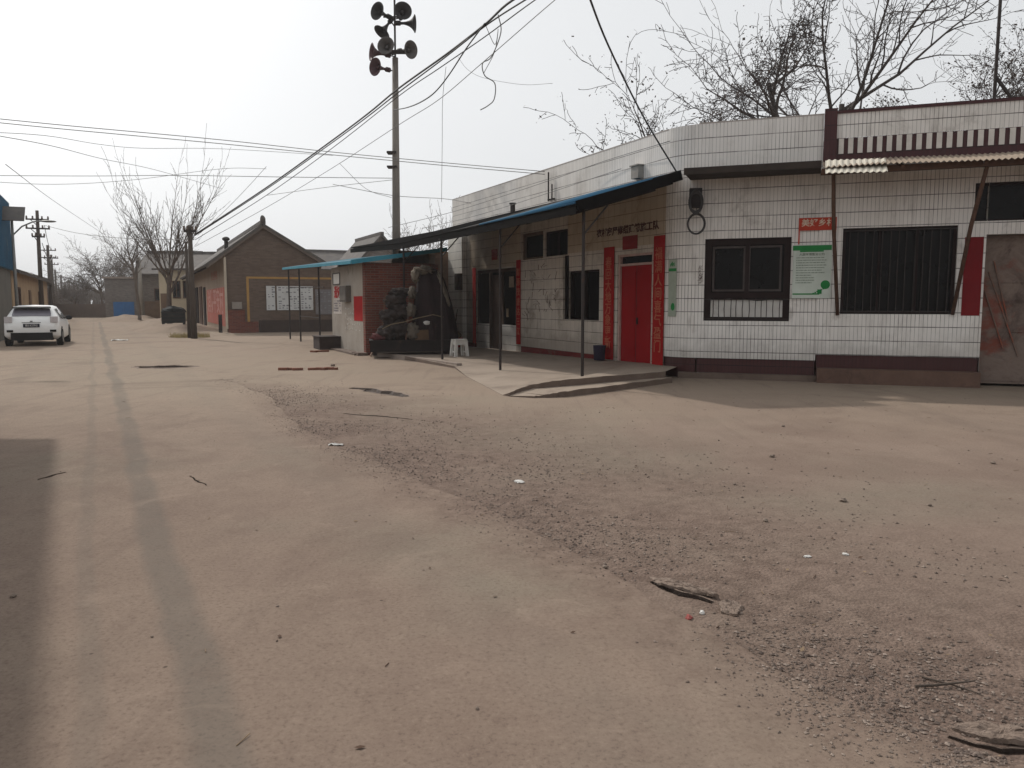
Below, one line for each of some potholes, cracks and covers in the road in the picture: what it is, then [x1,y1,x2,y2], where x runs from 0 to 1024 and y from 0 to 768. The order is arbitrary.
pothole [649,581,714,603]
pothole [948,735,1024,754]
pothole [351,387,410,397]
